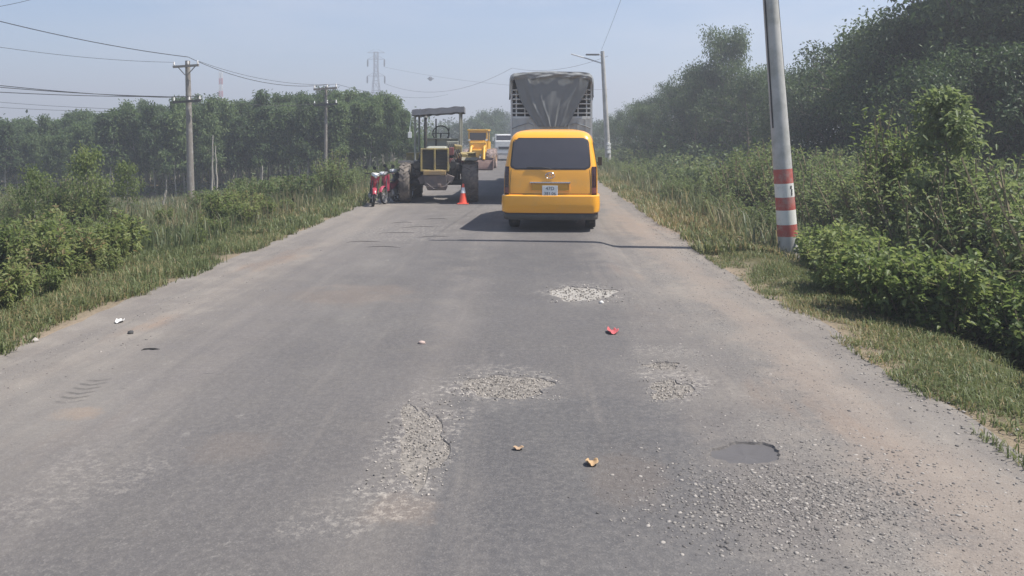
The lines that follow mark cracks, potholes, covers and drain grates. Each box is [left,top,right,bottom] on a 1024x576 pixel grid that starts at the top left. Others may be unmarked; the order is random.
pothole [356,398,467,496]
pothole [546,284,630,303]
pothole [708,441,780,464]
pothole [451,372,562,401]
pothole [639,376,707,403]
